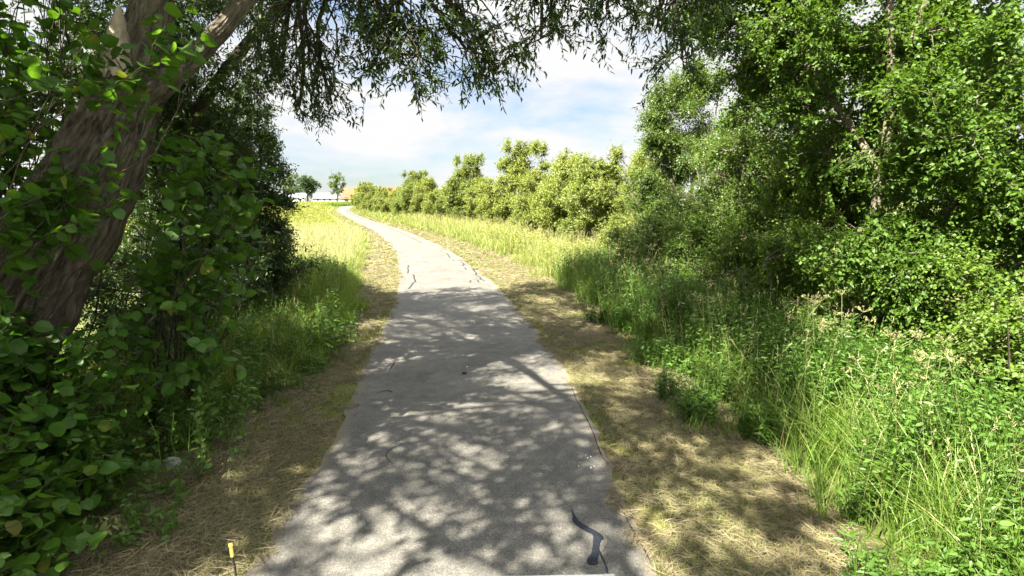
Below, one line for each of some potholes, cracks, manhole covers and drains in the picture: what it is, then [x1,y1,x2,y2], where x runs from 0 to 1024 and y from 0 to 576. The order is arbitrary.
crack [347,211,422,289]
